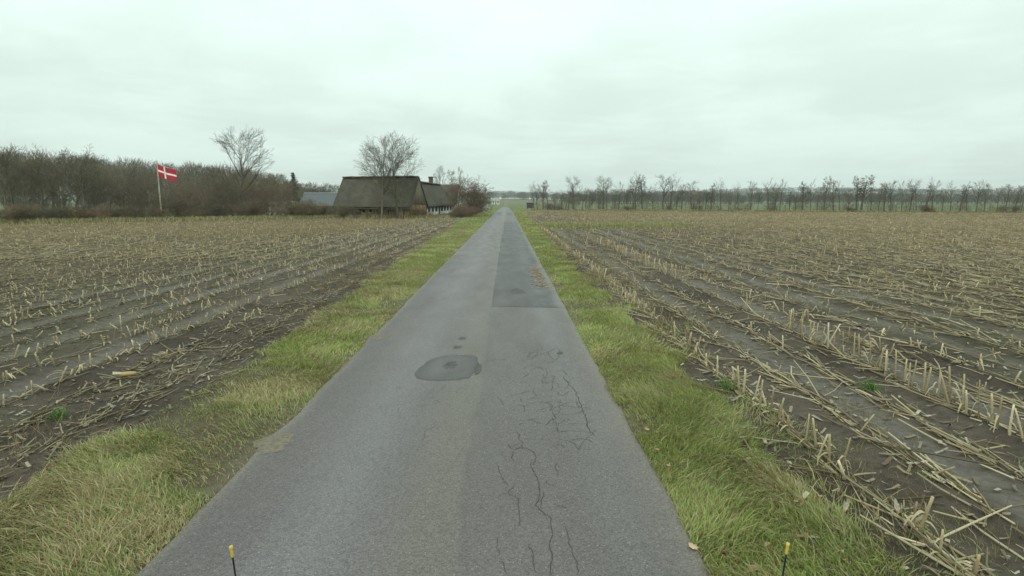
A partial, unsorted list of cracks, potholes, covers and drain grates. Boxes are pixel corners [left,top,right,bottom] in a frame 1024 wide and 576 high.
crack [490,346,596,573]
